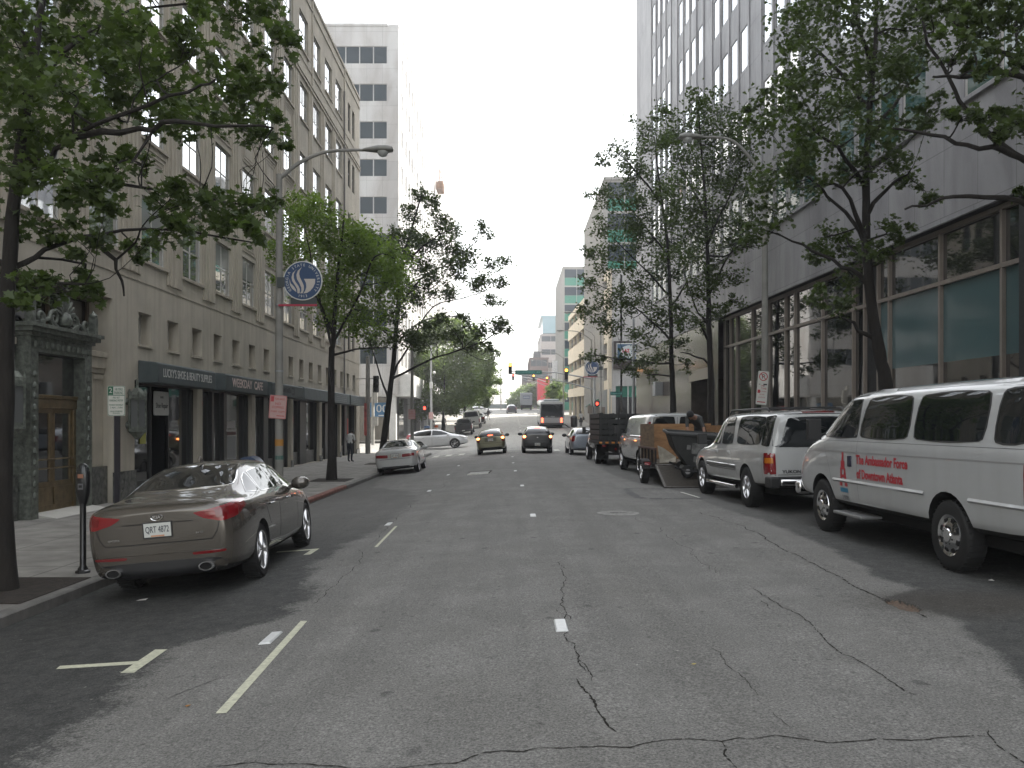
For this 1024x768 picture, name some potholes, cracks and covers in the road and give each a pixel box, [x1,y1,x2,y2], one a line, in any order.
crack [221,562,1024,768]
